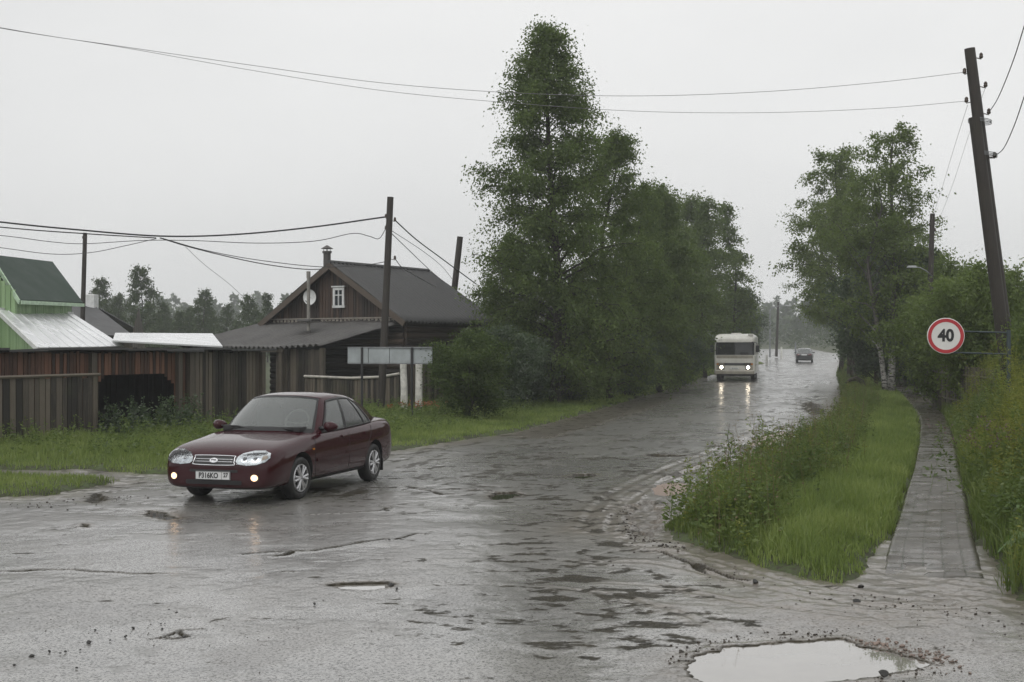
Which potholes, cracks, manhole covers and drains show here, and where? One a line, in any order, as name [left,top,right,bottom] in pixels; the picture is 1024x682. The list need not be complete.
pothole [81,493,111,504]
pothole [681,637,936,682]
pothole [321,580,401,591]
crack [241,533,428,573]
pothole [486,491,527,500]
pothole [139,510,183,520]
